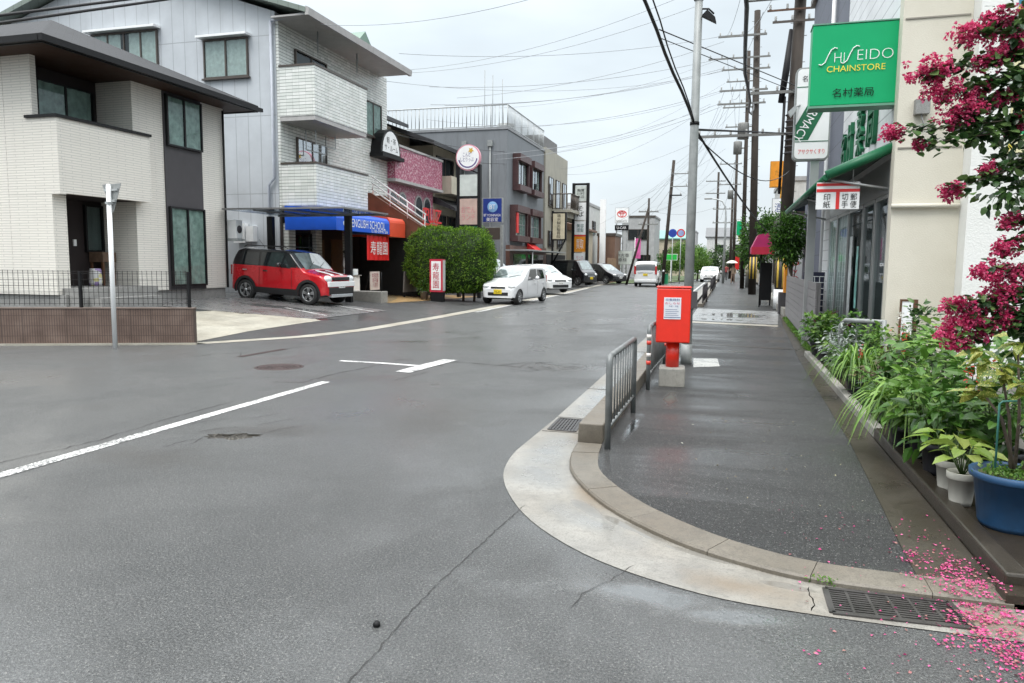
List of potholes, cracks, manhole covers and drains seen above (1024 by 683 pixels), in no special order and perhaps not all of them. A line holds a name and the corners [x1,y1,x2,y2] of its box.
crack [347,507,522,683]
drain grate [547,417,583,432]
drain grate [822,586,978,637]
